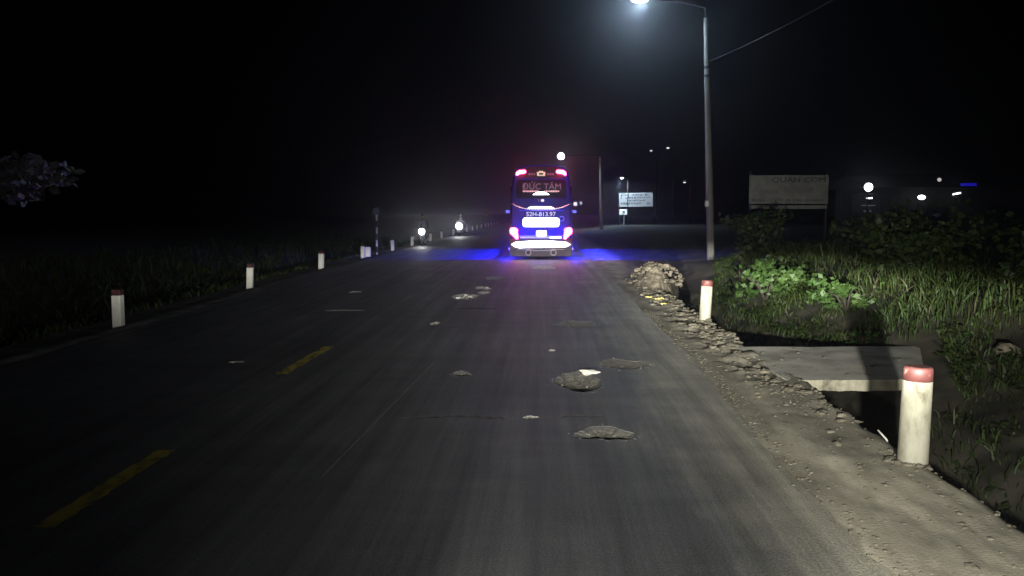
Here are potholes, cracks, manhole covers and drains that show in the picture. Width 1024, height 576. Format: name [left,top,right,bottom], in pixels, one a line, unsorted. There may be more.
pothole [554,320,597,329]
pothole [596,357,654,371]
pothole [551,371,603,393]
pothole [568,426,639,442]
